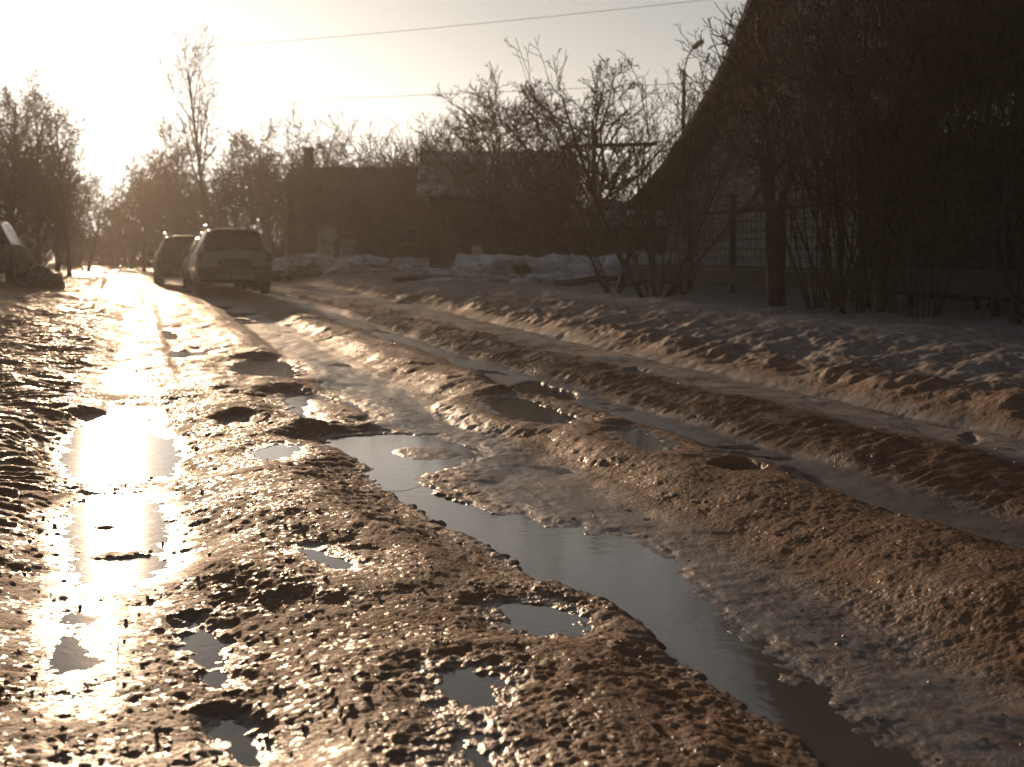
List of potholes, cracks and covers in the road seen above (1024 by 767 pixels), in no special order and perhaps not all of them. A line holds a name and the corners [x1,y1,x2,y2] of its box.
pothole [352,469,933,767]
pothole [469,394,591,425]
